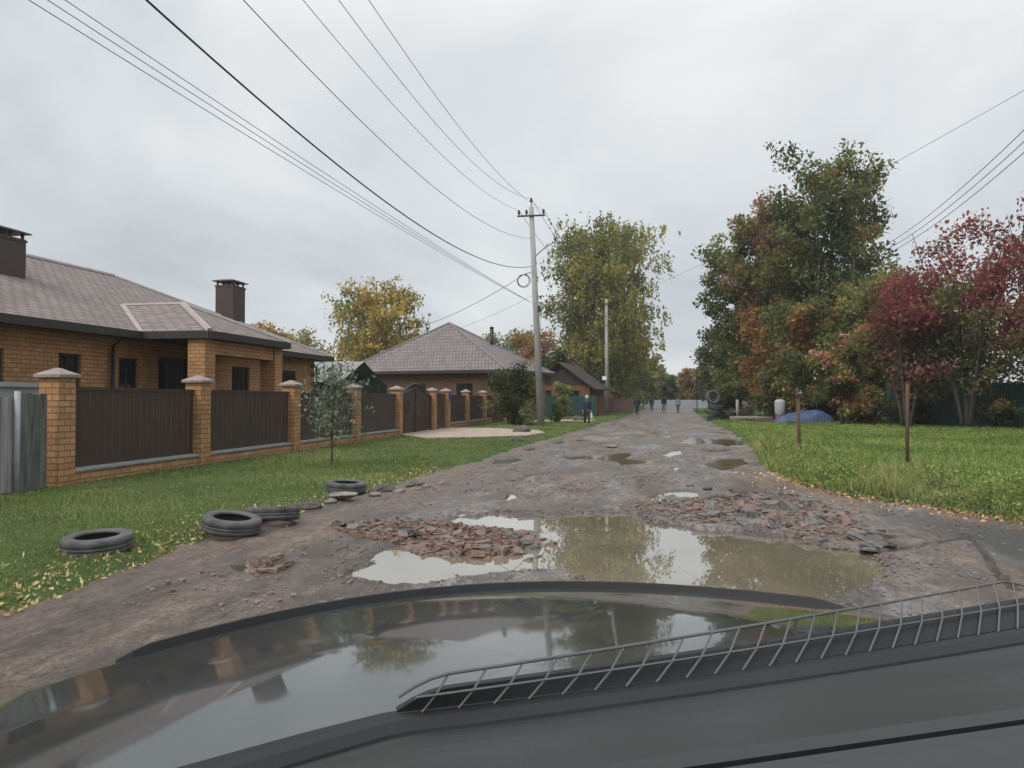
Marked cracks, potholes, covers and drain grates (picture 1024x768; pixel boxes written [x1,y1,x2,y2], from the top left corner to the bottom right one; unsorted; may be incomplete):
pothole [343,508,912,602]
pothole [597,451,649,465]
pothole [642,489,706,499]
crack [877,535,1024,591]
pothole [704,457,755,470]
